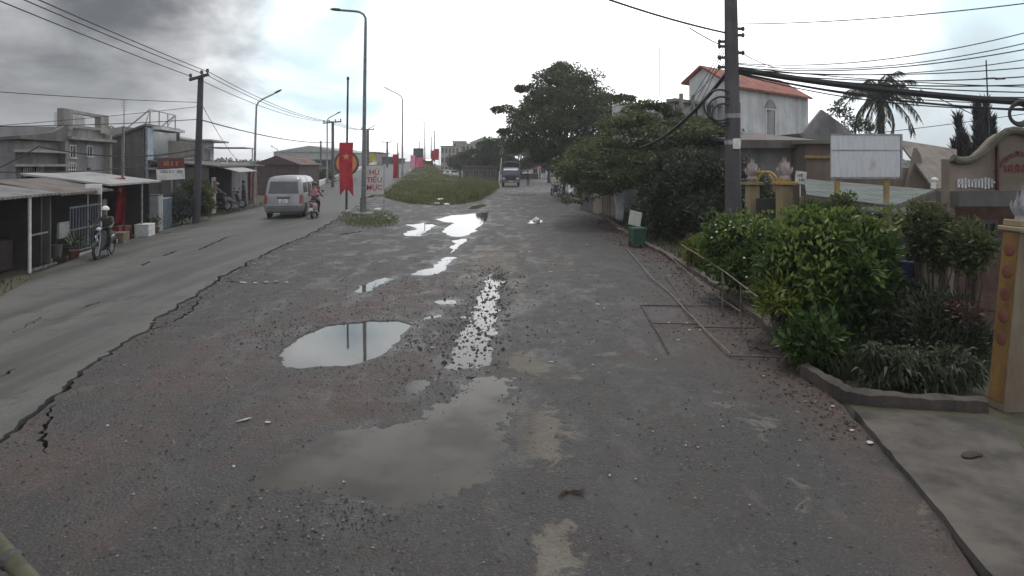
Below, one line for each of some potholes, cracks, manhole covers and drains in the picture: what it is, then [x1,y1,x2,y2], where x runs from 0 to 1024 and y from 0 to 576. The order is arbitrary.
pothole [278,320,412,368]
pothole [402,222,437,236]
crack [17,230,319,449]
pothole [436,212,489,237]
